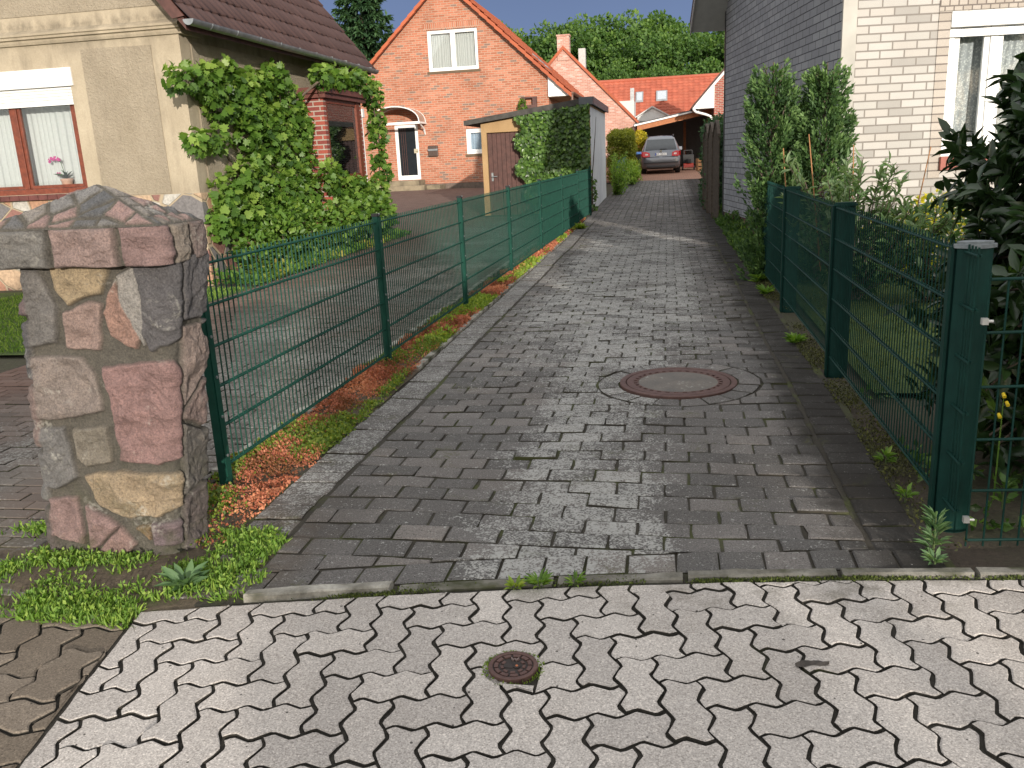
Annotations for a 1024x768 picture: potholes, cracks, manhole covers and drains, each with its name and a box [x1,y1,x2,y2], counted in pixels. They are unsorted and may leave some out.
manhole cover [620,367,737,400]
manhole cover [488,651,538,685]
